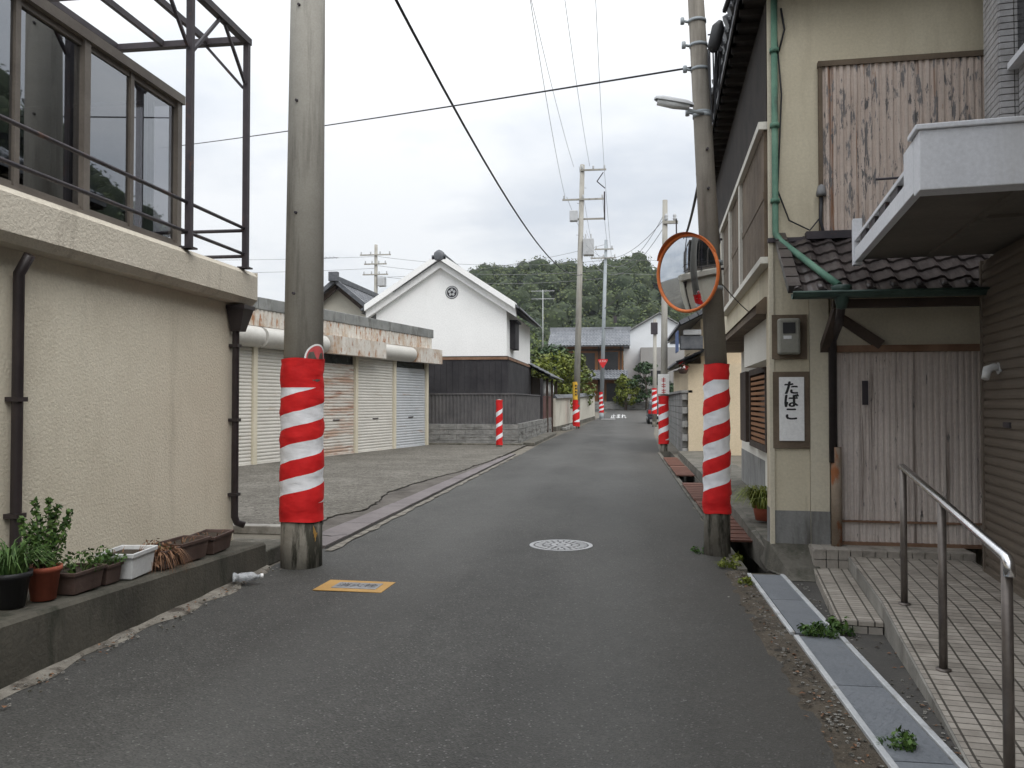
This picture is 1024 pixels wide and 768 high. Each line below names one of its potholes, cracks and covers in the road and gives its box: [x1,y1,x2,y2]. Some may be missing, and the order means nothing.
crack [322,456,503,536]
manhole cover [530,540,593,551]
